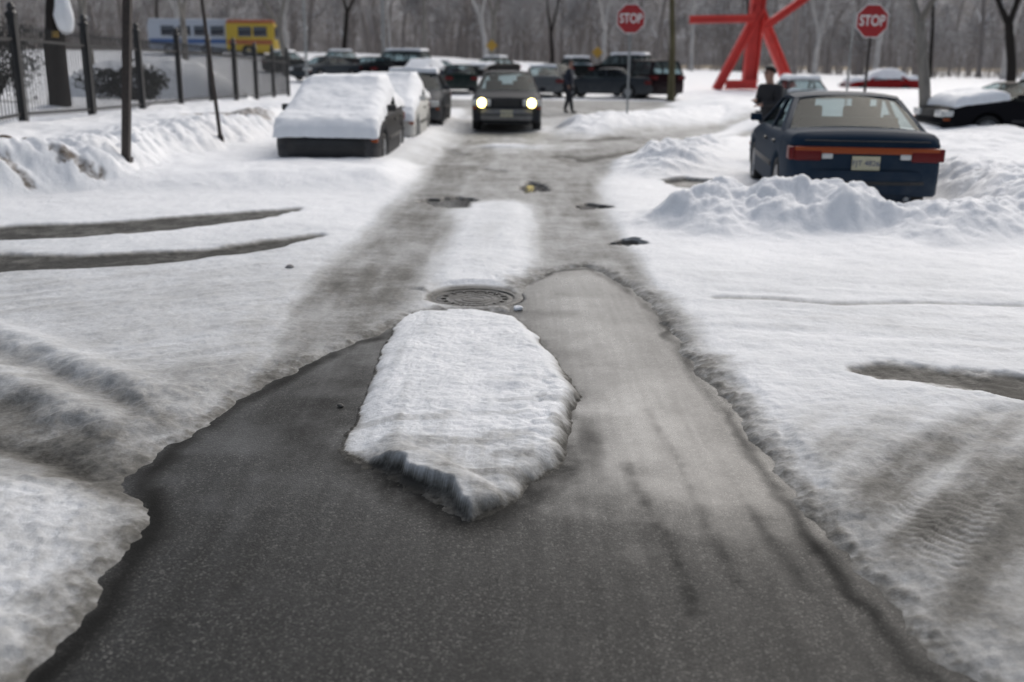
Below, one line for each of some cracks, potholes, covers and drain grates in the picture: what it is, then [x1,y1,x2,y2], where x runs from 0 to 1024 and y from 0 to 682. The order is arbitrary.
manhole cover [430,288,523,307]
pothole [416,196,479,208]
pothole [519,181,553,194]
